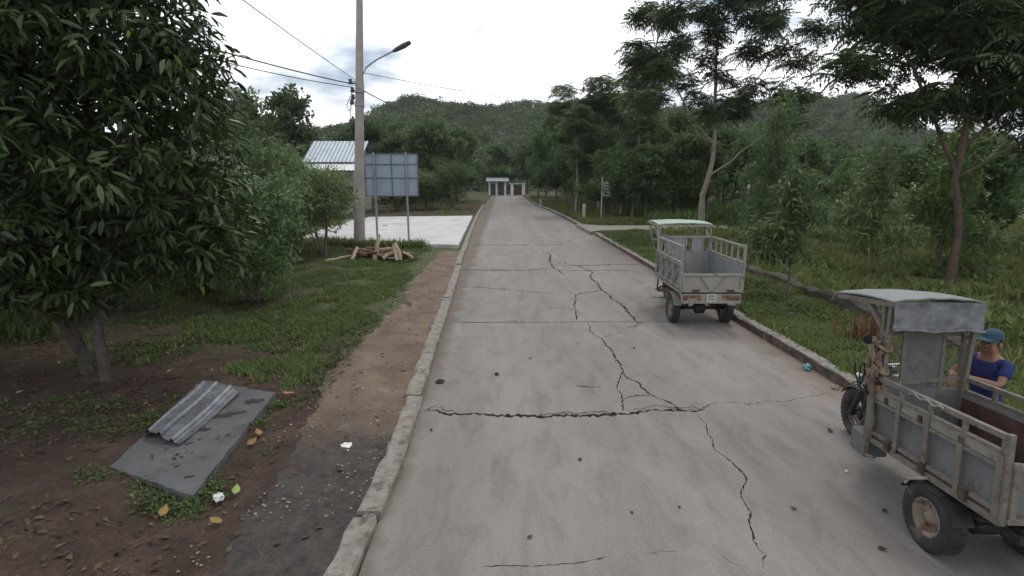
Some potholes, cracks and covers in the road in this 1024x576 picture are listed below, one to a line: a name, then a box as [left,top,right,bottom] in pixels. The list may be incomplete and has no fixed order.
crack [462,251,682,410]
crack [699,417,767,567]
